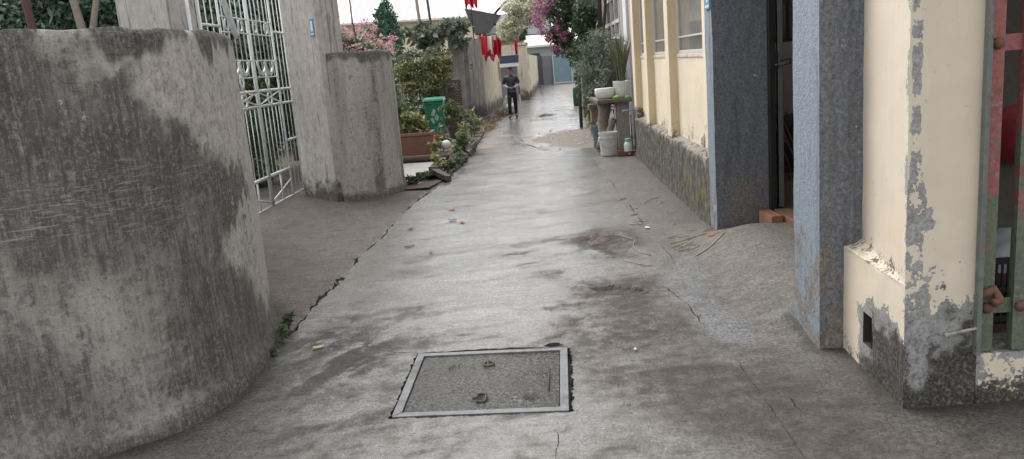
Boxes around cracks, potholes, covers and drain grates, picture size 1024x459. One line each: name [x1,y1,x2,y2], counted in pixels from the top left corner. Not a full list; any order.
manhole cover [392,347,570,419]
crack [284,187,437,339]
crack [658,283,844,459]
